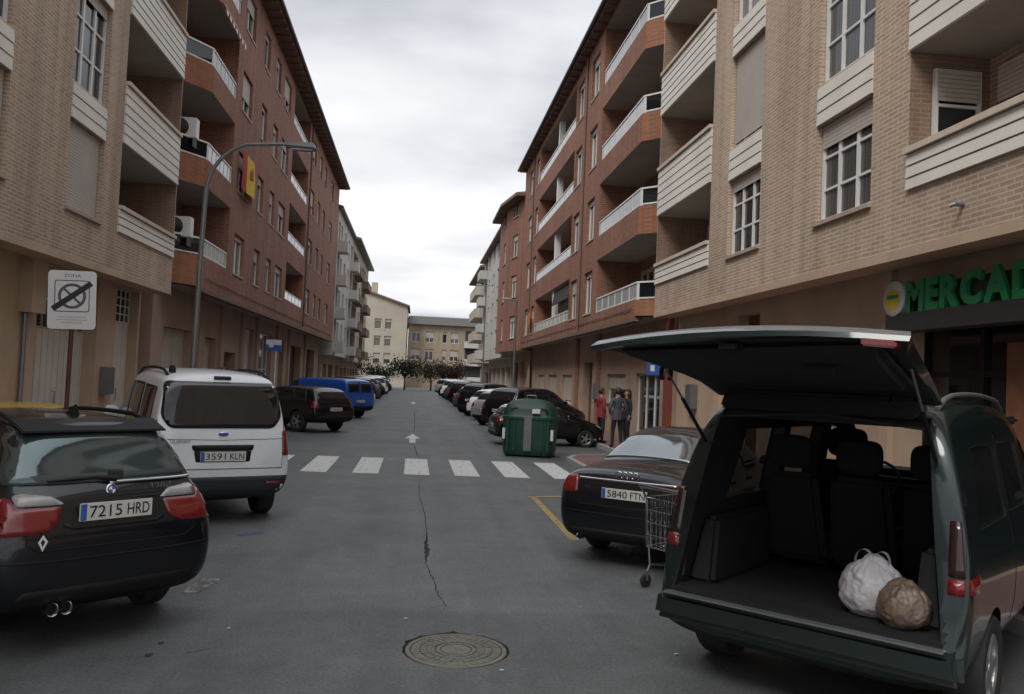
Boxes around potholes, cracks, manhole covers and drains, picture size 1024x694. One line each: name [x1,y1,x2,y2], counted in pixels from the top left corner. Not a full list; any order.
manhole cover [402,631,510,669]
crack [419,481,447,607]
